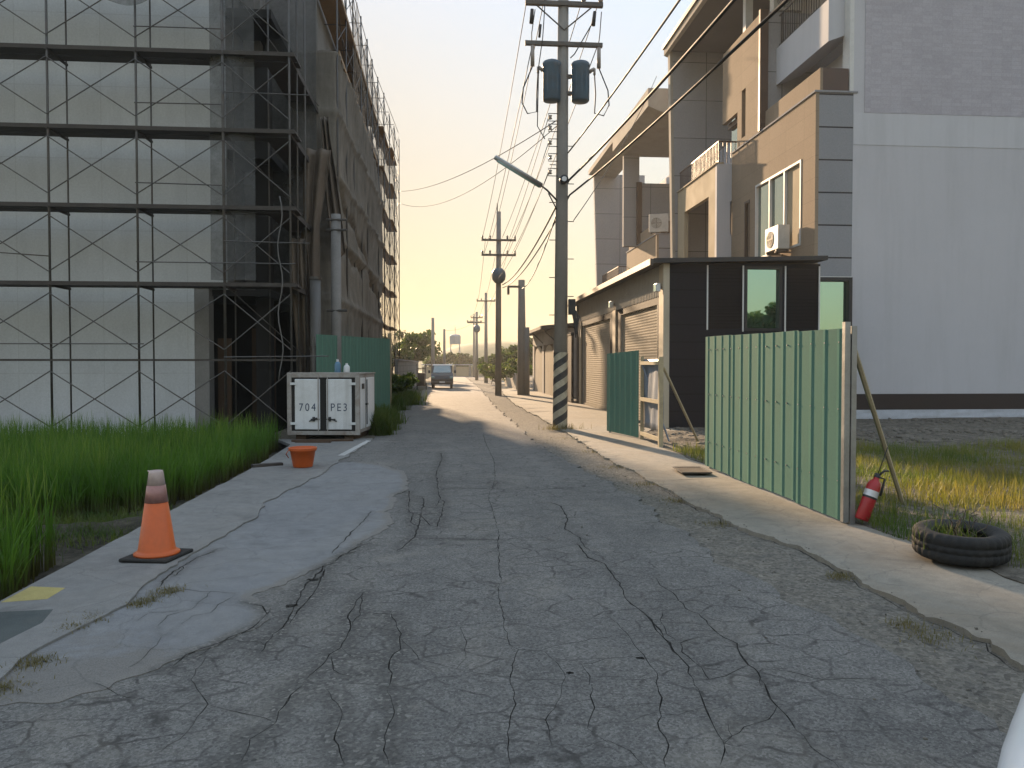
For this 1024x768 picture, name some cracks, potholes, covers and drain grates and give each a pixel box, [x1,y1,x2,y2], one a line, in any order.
crack [96,435,882,767]
